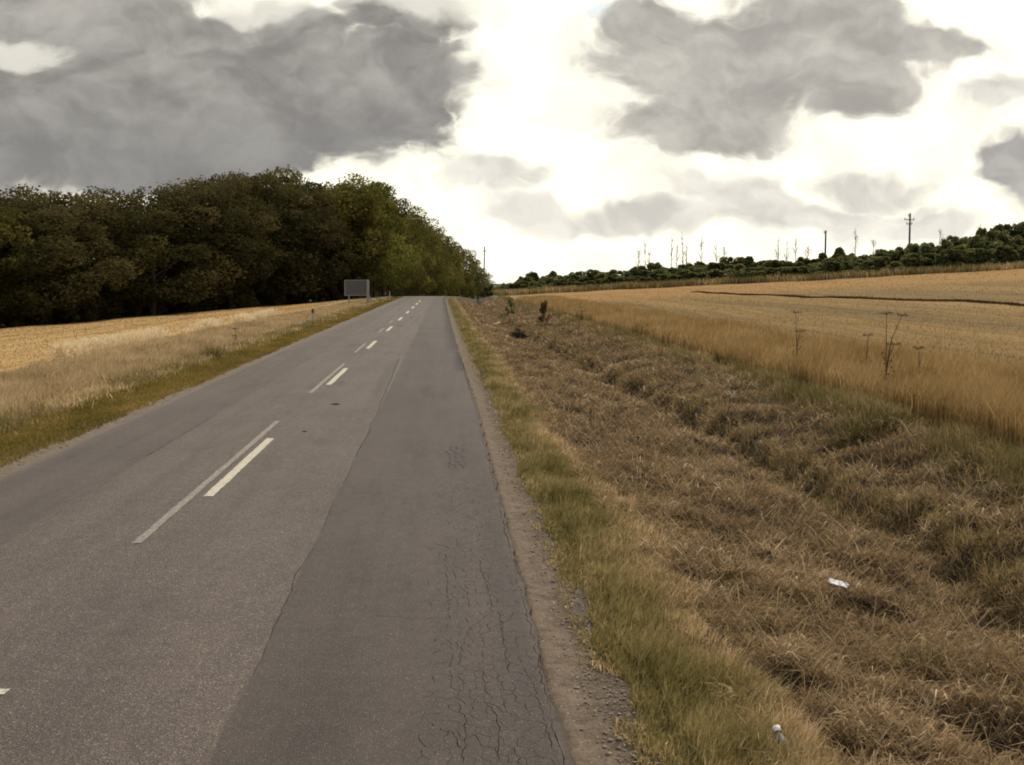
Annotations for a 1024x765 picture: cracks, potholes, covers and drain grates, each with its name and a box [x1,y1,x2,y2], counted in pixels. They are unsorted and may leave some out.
crack [416,373,564,765]
